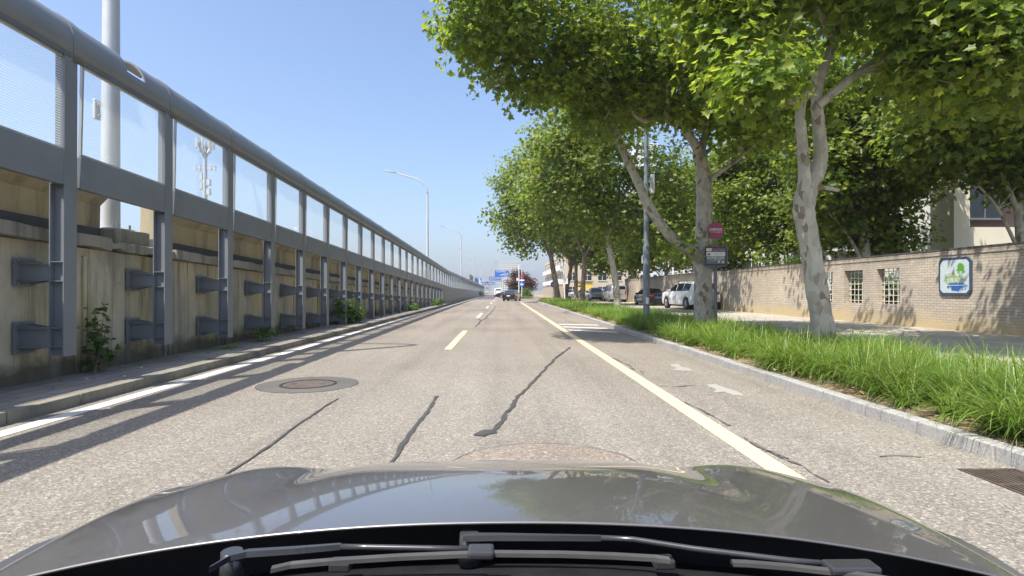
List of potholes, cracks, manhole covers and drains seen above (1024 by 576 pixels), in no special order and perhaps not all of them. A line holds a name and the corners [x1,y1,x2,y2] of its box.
drain grate [957,468,1024,496]
manhole cover [255,376,359,393]
